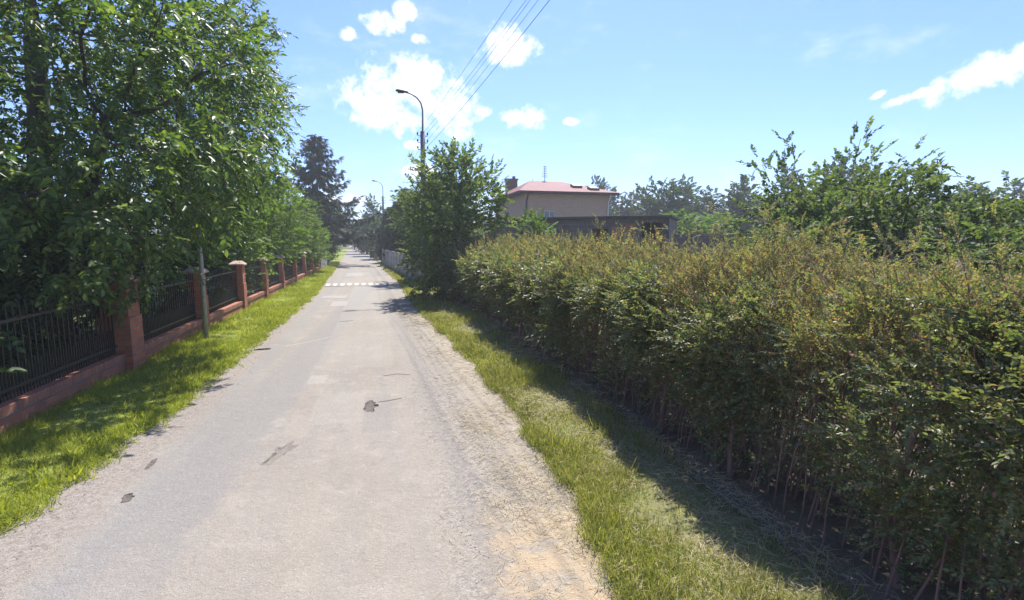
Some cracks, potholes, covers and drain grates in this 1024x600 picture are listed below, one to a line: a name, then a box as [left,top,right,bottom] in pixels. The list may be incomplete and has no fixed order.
pothole [260,441,299,465]
pothole [363,400,379,412]
